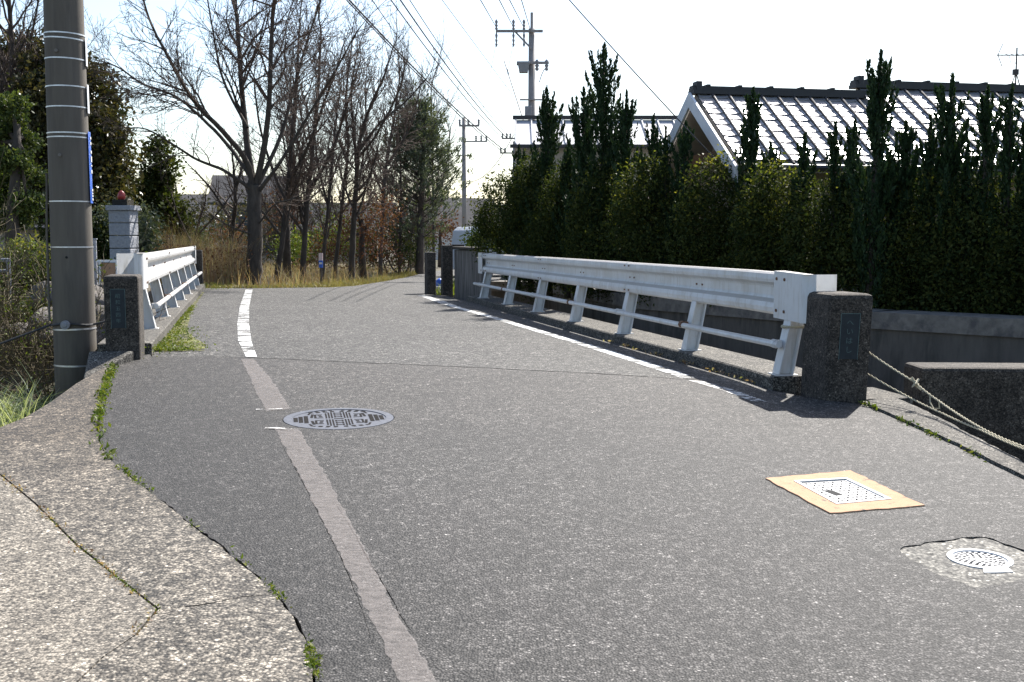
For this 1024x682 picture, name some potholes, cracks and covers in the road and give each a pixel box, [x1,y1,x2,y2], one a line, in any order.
manhole cover [283,408,394,430]
